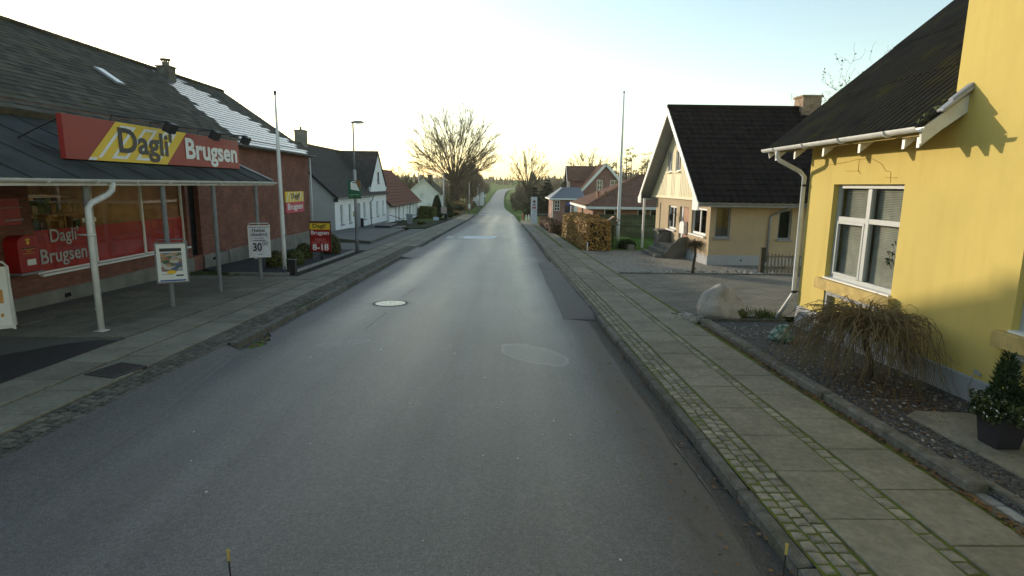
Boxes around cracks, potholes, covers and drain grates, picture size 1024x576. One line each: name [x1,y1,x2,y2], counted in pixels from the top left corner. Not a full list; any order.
pothole [240,333,271,349]
